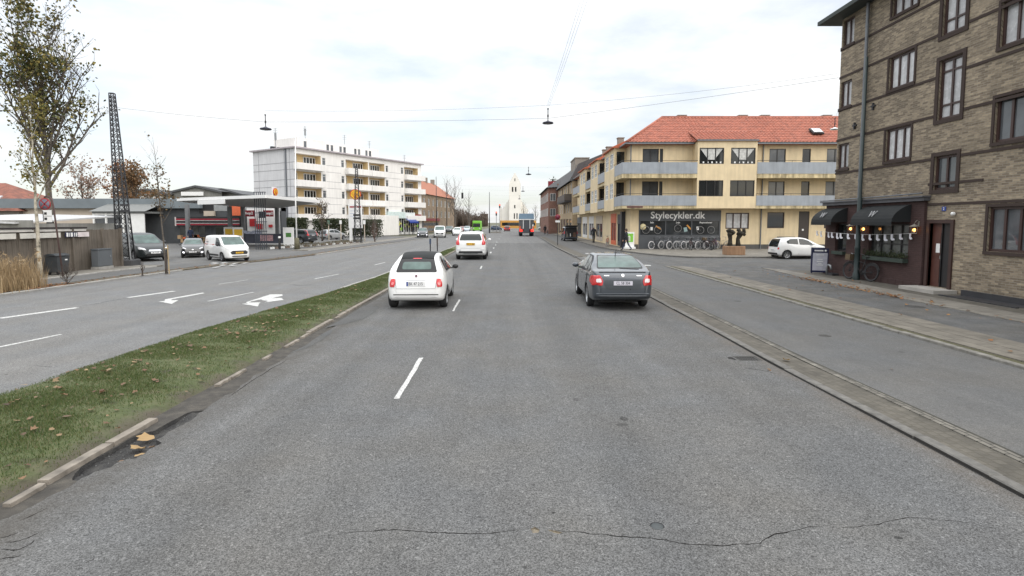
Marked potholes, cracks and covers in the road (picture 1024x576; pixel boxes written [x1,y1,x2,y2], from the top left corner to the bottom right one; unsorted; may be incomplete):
pothole [72,411,201,481]
crack [1,510,42,559]
crack [349,517,996,546]
